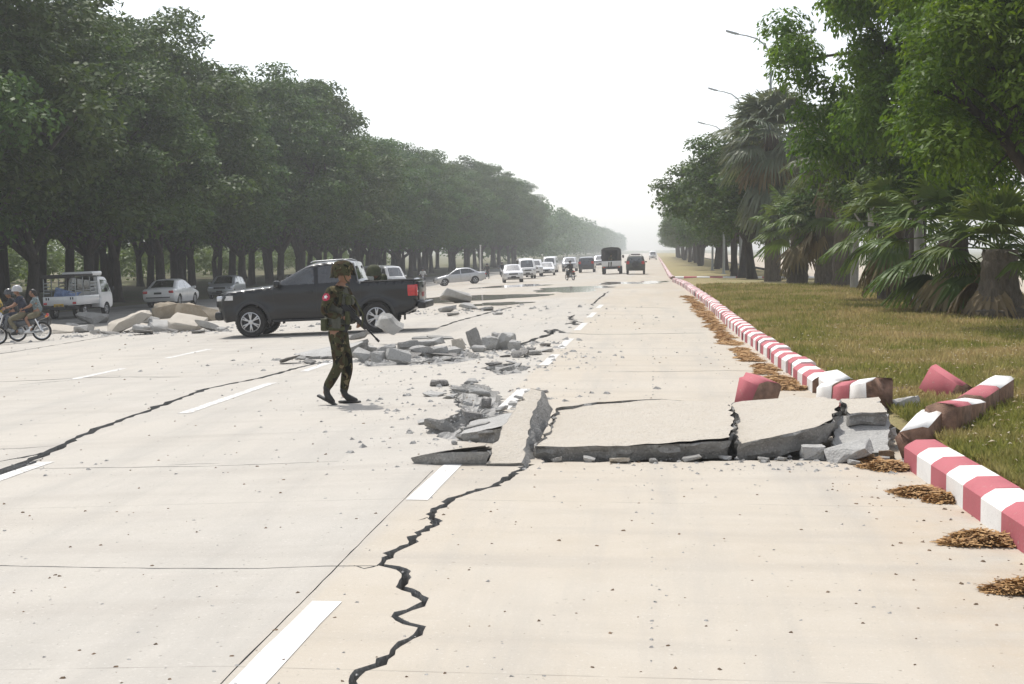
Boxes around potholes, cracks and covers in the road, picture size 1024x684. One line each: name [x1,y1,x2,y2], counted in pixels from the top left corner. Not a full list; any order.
crack [438,307,511,328]
crack [0,464,527,684]
crack [0,360,332,475]
pothole [425,383,505,440]
